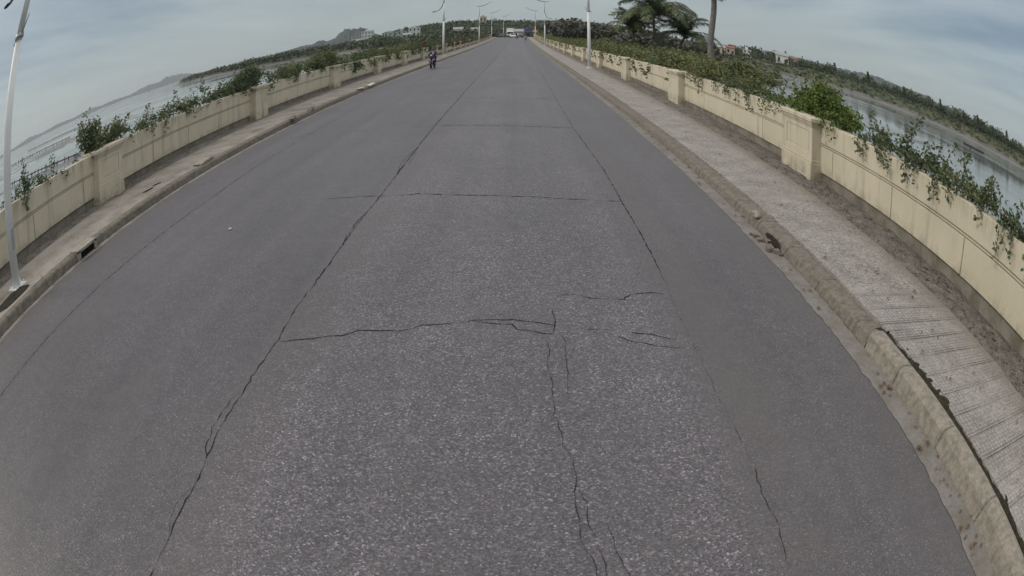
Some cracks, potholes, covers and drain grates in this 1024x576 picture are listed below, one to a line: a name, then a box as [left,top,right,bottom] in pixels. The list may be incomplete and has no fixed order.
drain grate [70,237,97,261]
crack [150,46,788,576]
